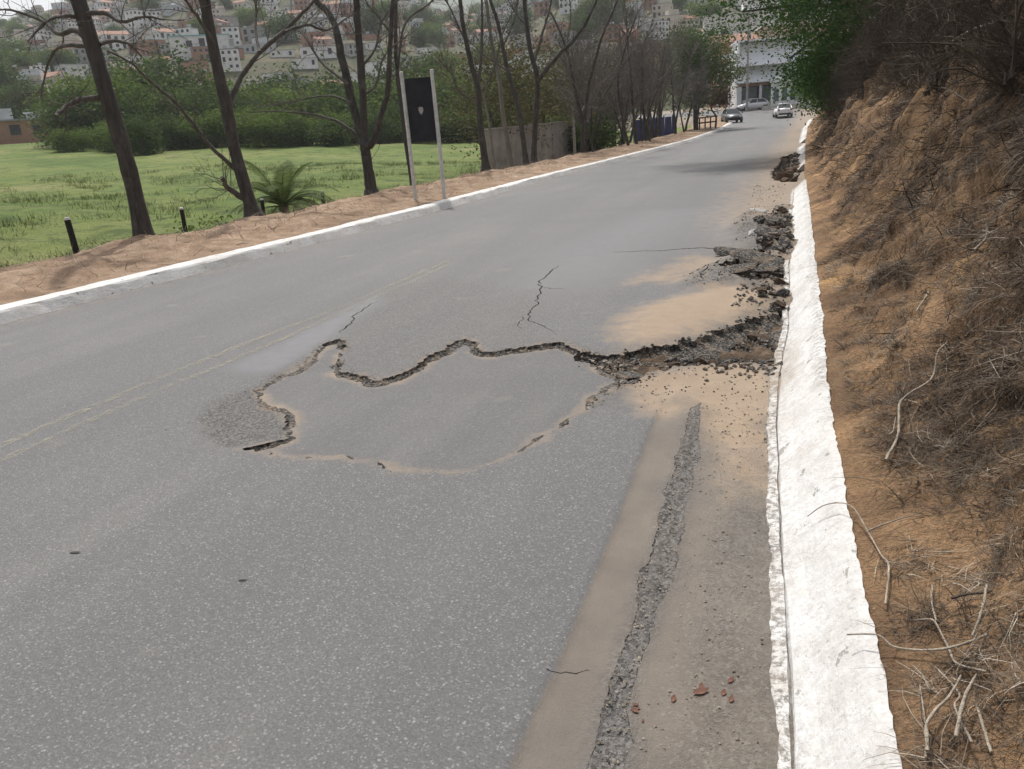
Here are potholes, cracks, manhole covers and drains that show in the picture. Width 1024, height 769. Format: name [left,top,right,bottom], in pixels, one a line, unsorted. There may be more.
pothole [573,307,789,384]
pothole [718,256,784,280]
pothole [770,156,792,179]
crack [517,265,560,334]
